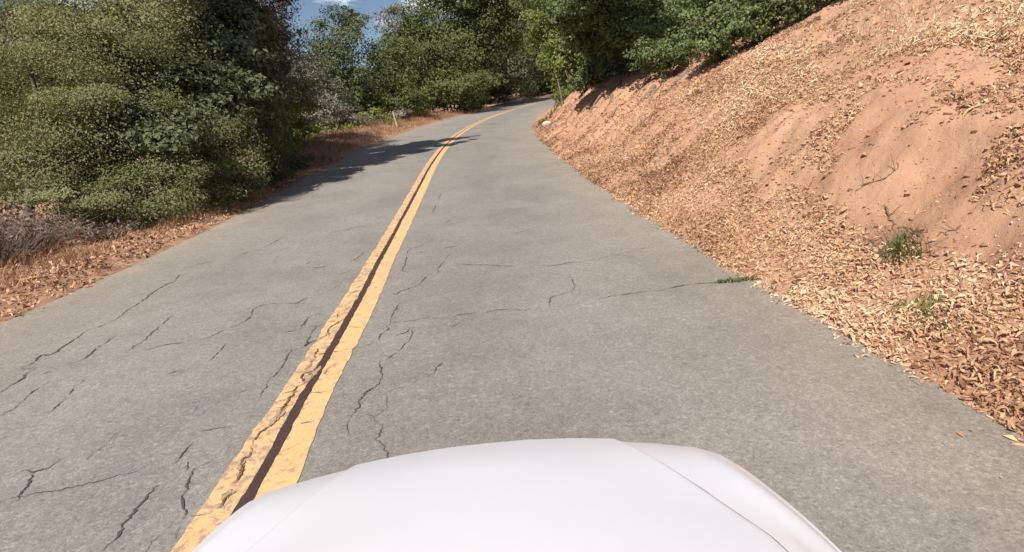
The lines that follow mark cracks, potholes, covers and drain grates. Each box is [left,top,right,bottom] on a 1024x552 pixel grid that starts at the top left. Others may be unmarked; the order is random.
crack [346,244,647,458]
crack [159,237,396,539]
crack [3,458,158,552]
crack [0,275,181,415]
